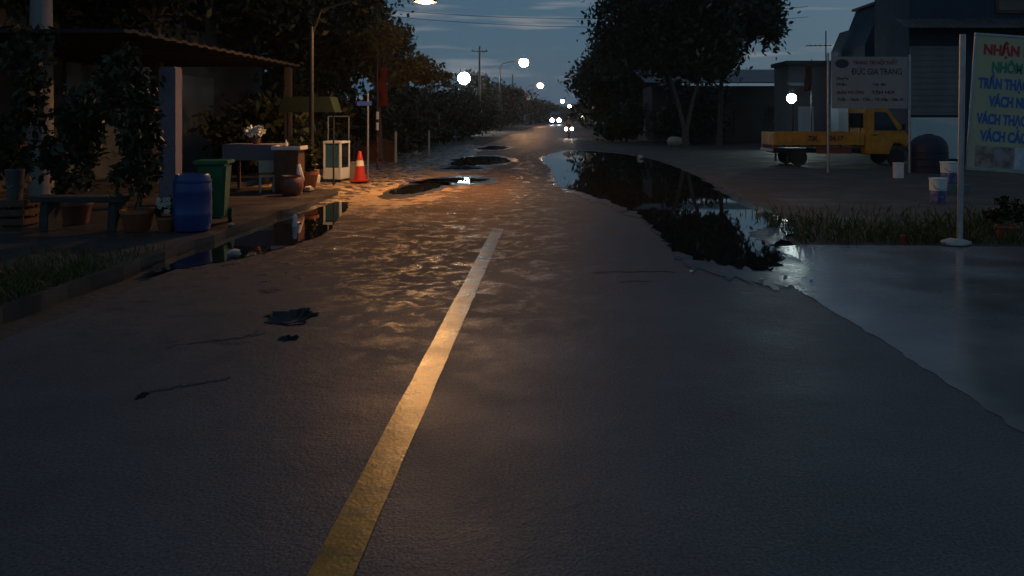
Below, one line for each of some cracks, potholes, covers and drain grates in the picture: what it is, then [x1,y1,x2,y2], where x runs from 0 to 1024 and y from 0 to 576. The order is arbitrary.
crack [166,329,262,348]
crack [149,377,231,392]
pothole [264,308,319,326]
